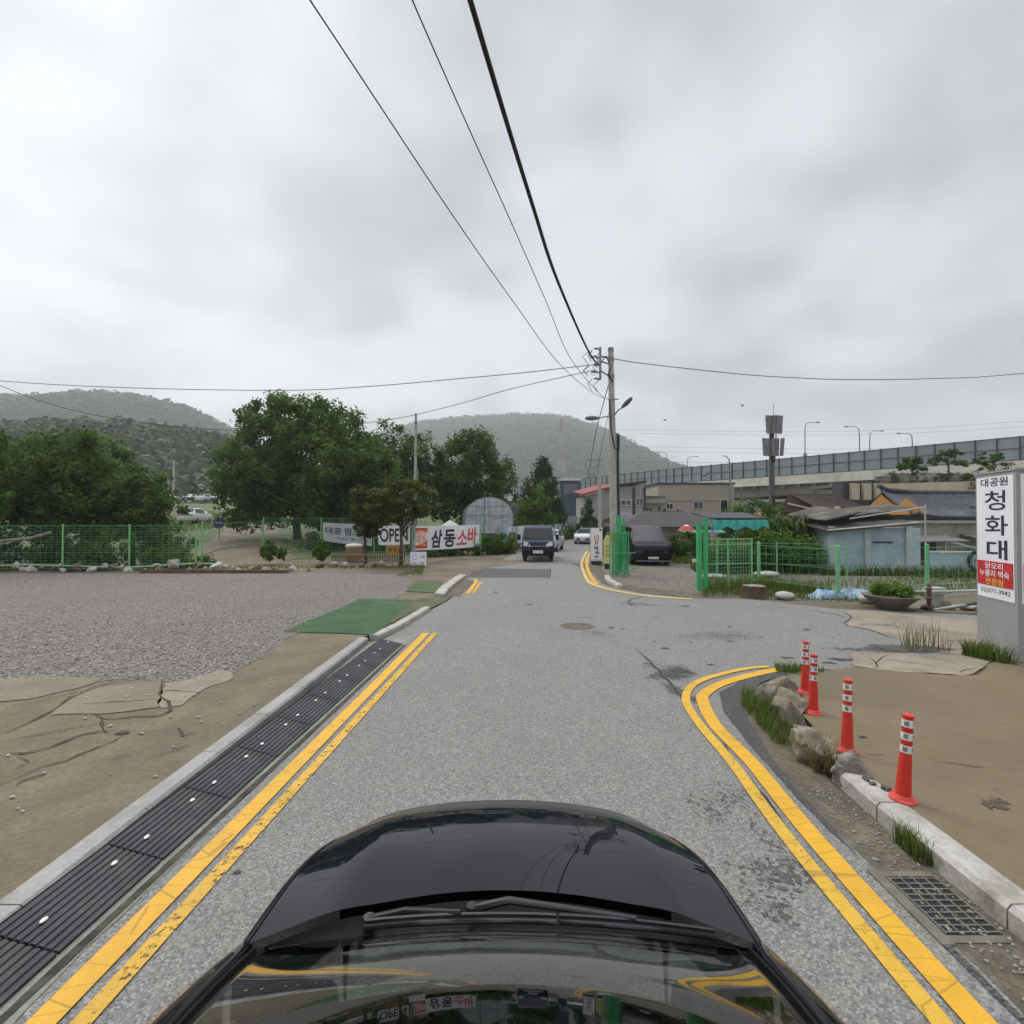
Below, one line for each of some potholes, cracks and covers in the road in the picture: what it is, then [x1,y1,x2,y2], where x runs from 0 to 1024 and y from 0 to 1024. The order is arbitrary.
crack [1,682,202,785]
drain grate [867,870,1013,946]
crack [819,611,977,667]
